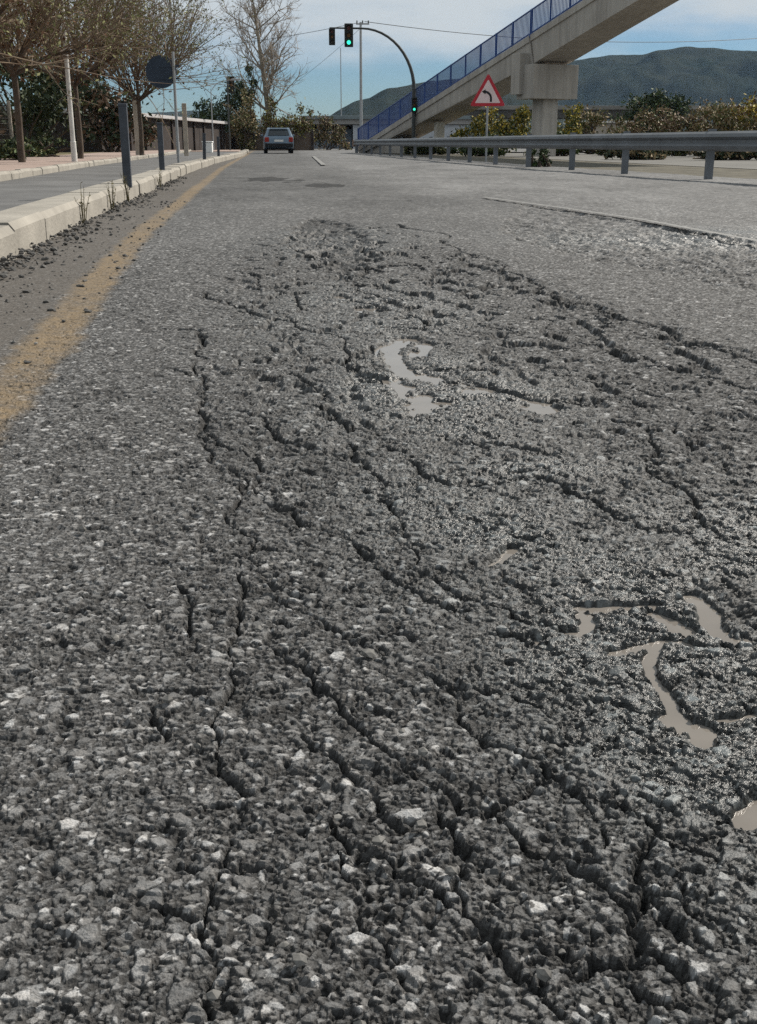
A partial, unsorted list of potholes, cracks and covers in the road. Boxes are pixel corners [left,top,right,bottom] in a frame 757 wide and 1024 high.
crack [38,224,757,1024]
pothole [730,782,757,838]
pothole [377,328,563,419]
pothole [559,576,757,750]
